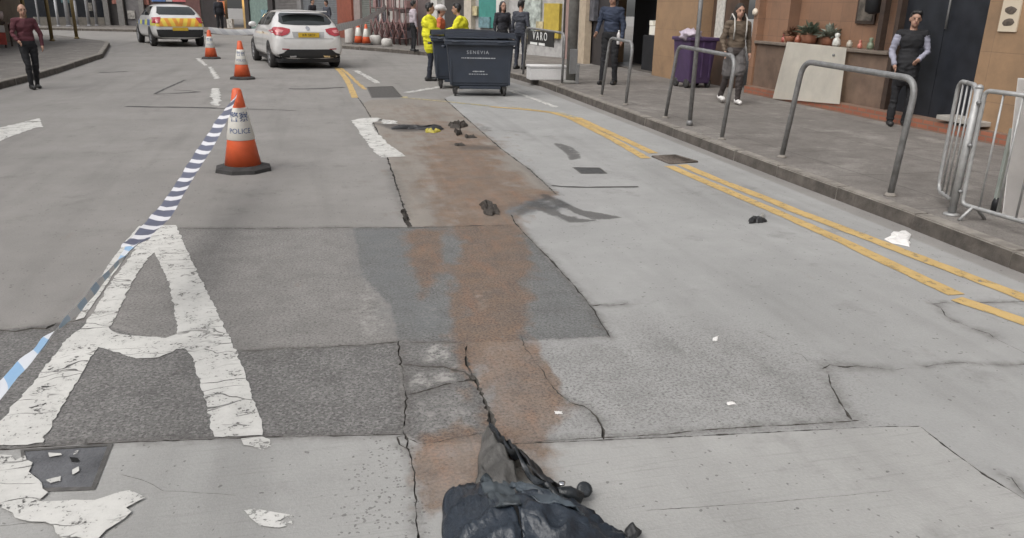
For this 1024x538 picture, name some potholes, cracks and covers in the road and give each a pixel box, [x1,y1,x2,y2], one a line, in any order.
crack [241,341,498,538]
manhole cover [20,443,113,491]
manhole cover [367,86,402,98]
